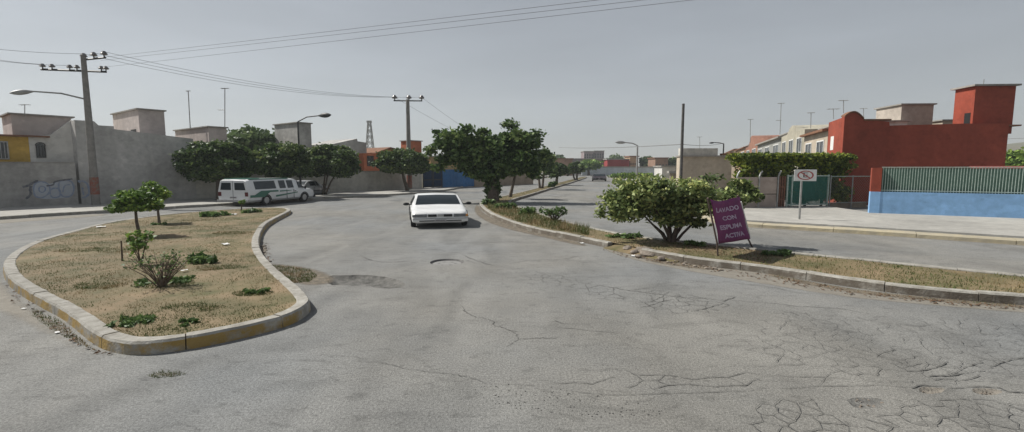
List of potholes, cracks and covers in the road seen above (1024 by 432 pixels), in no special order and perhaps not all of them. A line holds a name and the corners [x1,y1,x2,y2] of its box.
pothole [847,397,886,409]
crack [519,256,1024,432]
crack [462,306,615,344]
